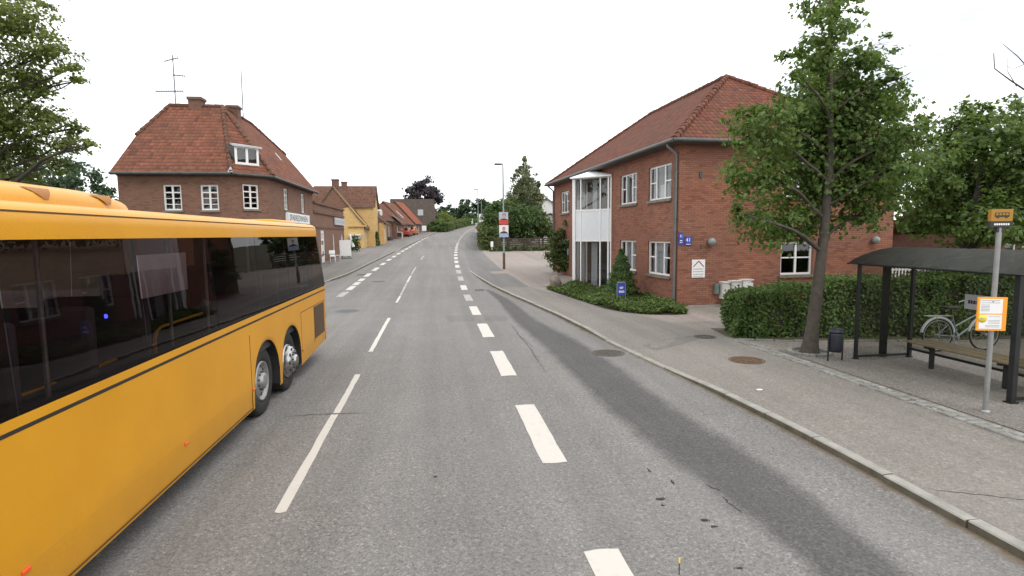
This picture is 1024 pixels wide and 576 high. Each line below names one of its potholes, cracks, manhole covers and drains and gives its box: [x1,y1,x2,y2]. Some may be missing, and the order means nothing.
crack [936,490,1024,500]
manhole cover [728,356,766,364]
manhole cover [592,349,625,357]
